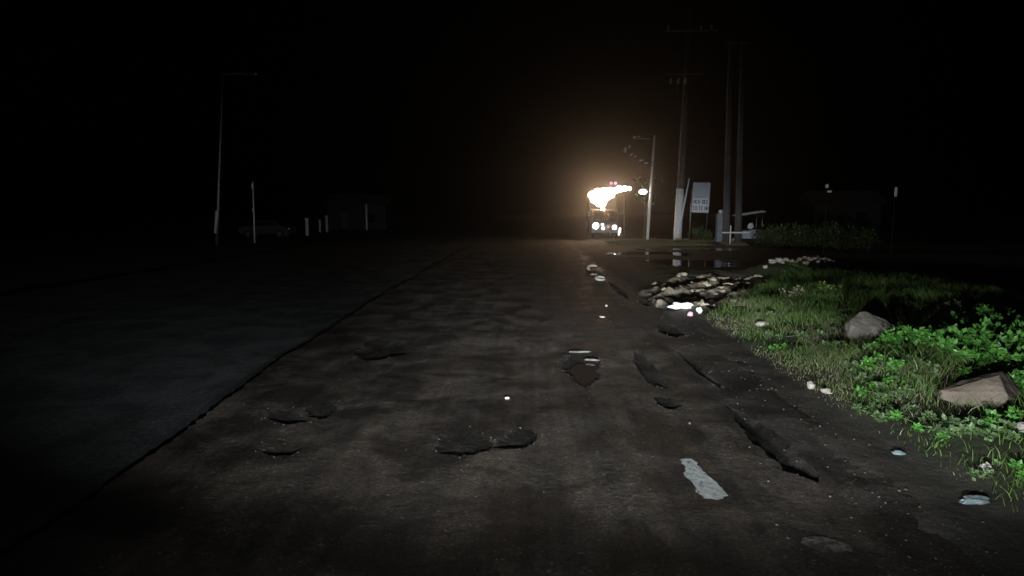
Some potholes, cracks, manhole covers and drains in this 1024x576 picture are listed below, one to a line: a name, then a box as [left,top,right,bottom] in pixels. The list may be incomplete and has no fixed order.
pothole [305,403,337,419]
pothole [434,431,494,456]
pothole [633,352,669,389]
pothole [261,445,302,456]
pothole [353,340,406,361]
pothole [657,324,686,338]
pothole [653,397,682,410]
pothole [562,350,602,388]
pothole [493,430,538,449]
